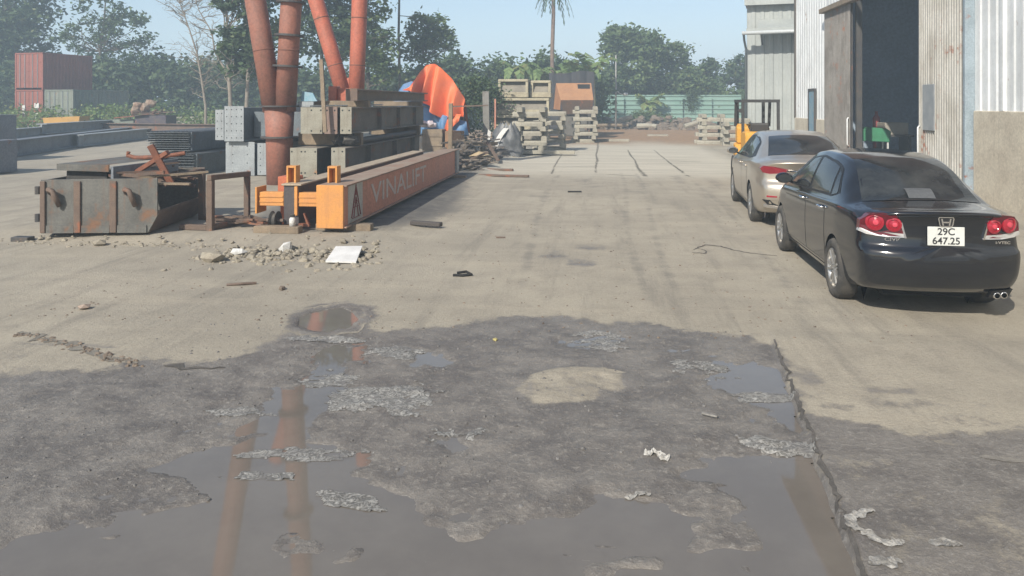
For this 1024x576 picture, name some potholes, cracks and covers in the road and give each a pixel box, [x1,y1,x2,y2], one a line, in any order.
pothole [282,302,384,339]
crack [17,331,138,363]
crack [773,339,868,576]
